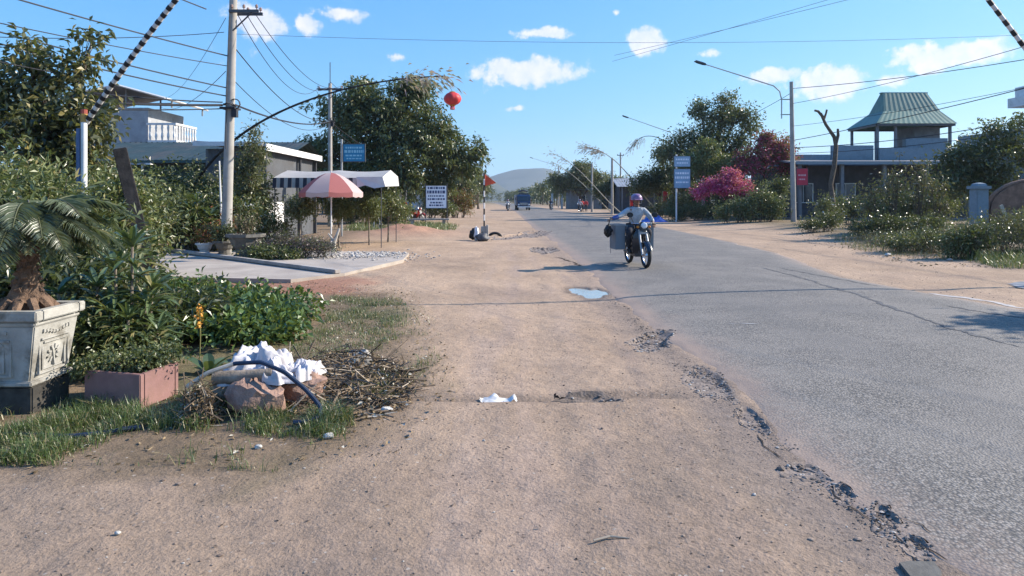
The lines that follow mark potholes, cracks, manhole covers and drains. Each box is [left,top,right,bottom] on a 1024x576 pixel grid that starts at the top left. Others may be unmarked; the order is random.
pothole [680,365,740,405]
pothole [870,503,903,536]
pothole [776,463,832,483]
pothole [624,329,676,353]
pothole [831,481,857,508]
pothole [899,534,937,561]
pothole [551,391,625,403]
pothole [529,247,560,255]
pothole [733,405,773,435]
